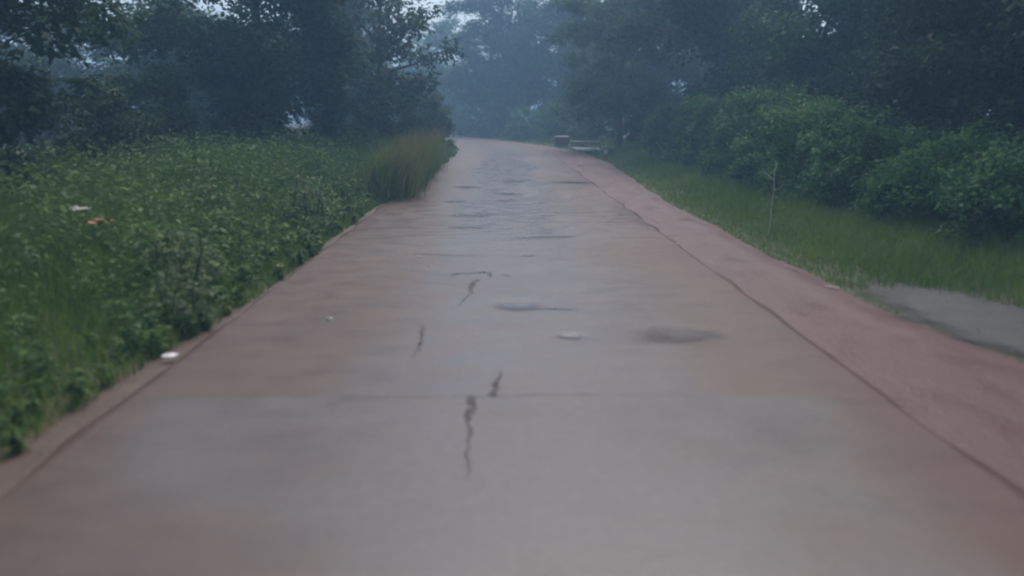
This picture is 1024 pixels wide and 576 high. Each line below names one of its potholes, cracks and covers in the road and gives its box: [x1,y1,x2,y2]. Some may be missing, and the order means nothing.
crack [411,326,425,357]
crack [464,372,503,479]
crack [417,253,509,305]
